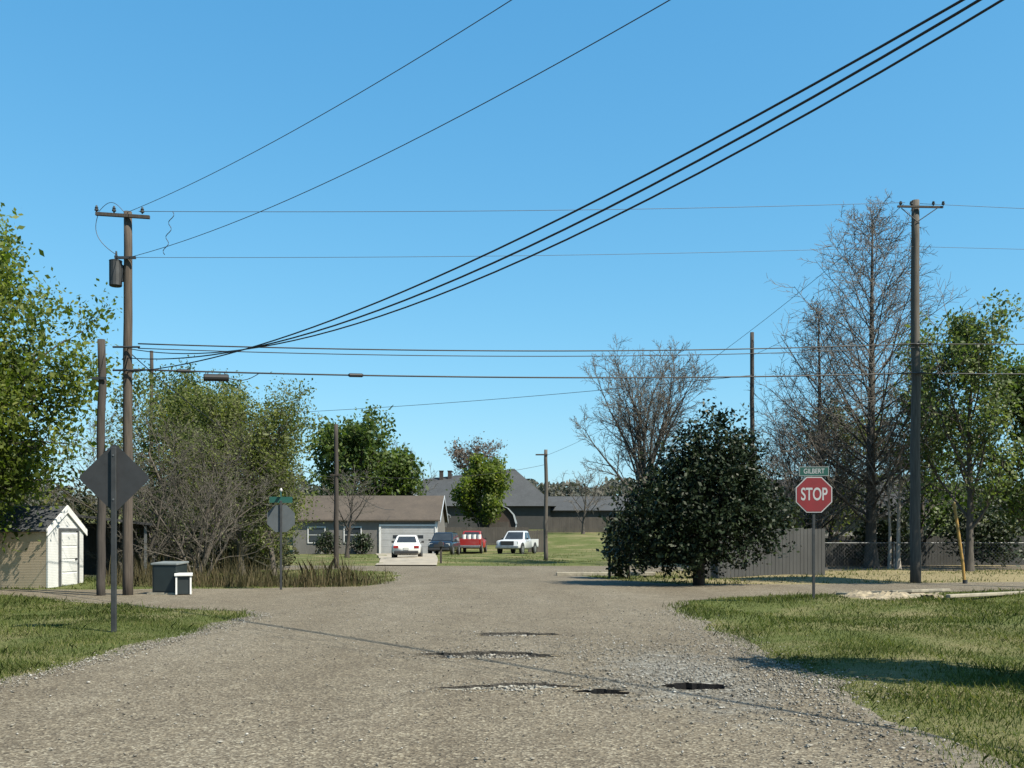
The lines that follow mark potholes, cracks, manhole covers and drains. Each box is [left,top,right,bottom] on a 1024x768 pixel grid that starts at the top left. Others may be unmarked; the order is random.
pothole [415,651,566,659]
pothole [434,682,583,692]
pothole [659,682,736,691]
